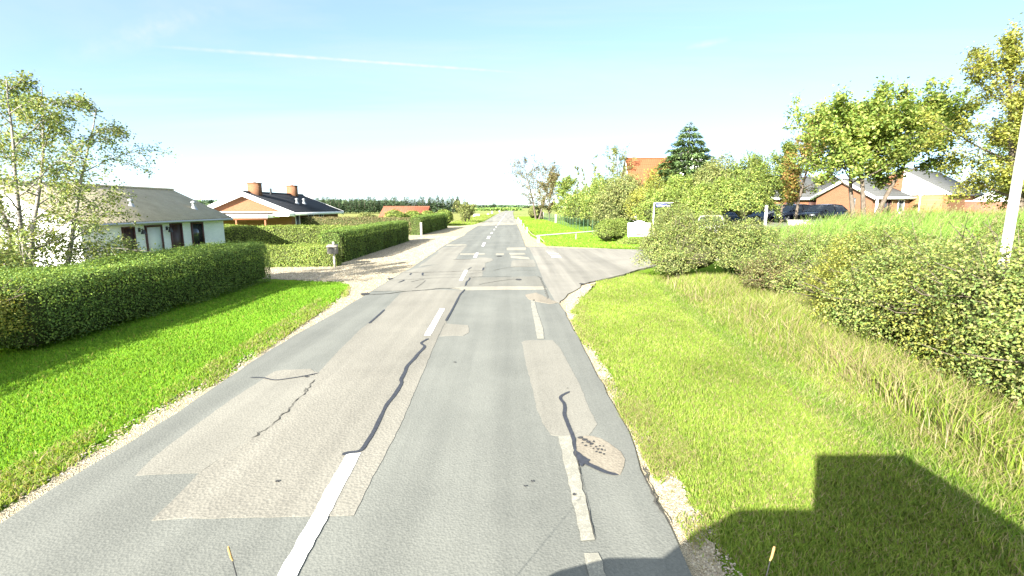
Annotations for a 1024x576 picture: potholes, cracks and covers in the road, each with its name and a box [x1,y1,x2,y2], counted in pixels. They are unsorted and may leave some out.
crack [254,379,315,437]
crack [368,266,520,323]
